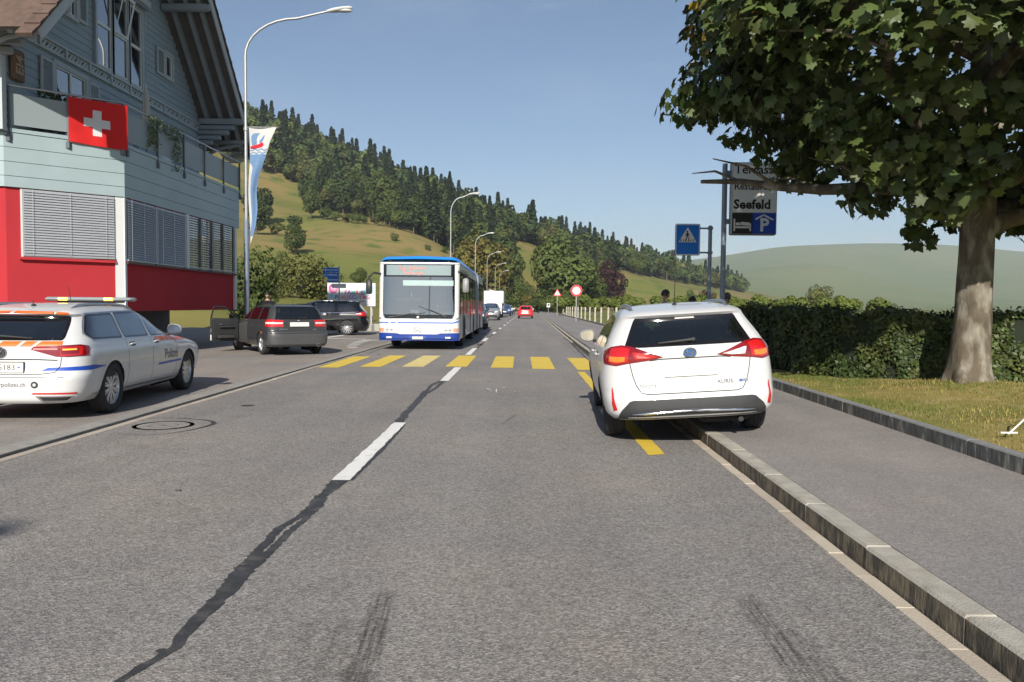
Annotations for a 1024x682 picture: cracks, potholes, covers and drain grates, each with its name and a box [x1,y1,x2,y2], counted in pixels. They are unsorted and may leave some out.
manhole cover [132,421,194,430]
